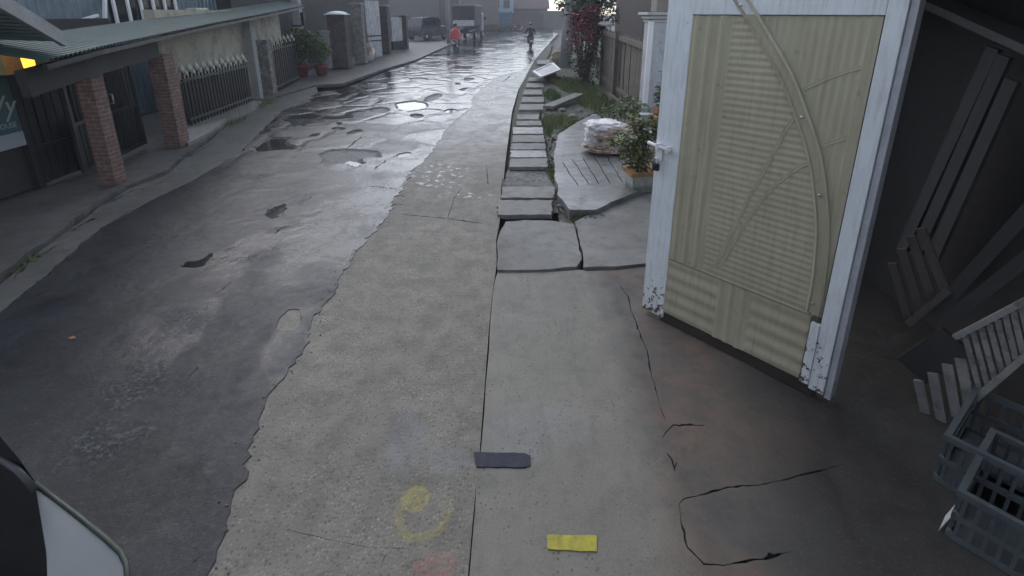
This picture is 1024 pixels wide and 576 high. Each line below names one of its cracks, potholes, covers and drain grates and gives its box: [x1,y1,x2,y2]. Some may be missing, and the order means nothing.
pothole [251,136,297,152]
pothole [180,252,213,268]
pothole [394,100,429,110]
pothole [265,203,287,219]
crack [619,284,846,566]
crack [371,155,483,224]
pothole [318,149,382,167]
